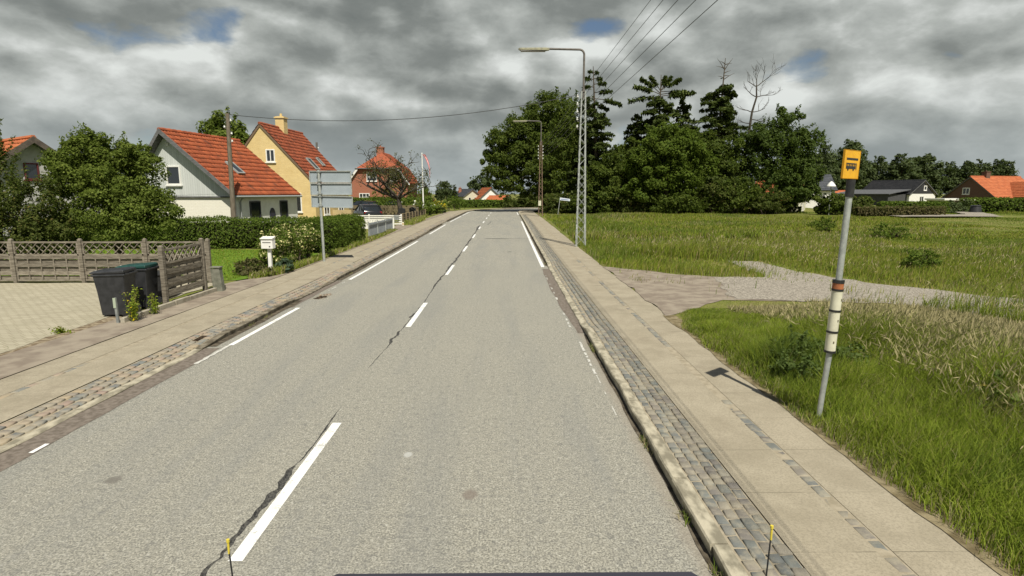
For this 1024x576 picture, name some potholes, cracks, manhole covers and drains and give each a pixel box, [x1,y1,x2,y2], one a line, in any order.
crack [200,411,338,576]
crack [369,225,480,367]
